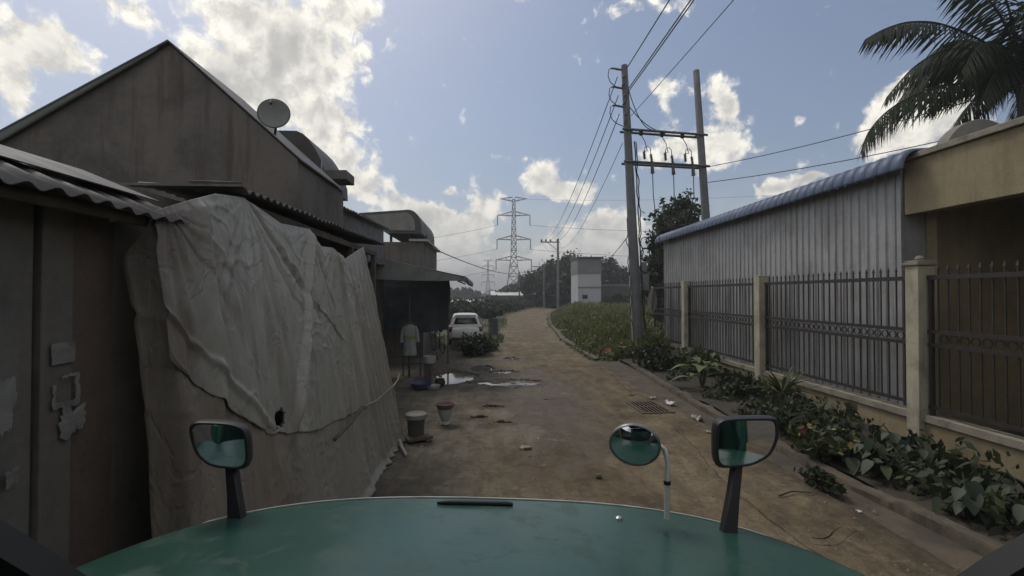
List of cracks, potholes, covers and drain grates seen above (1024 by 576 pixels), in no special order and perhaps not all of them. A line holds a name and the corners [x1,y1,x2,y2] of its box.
pothole [466,378,549,389]
pothole [421,370,484,385]
